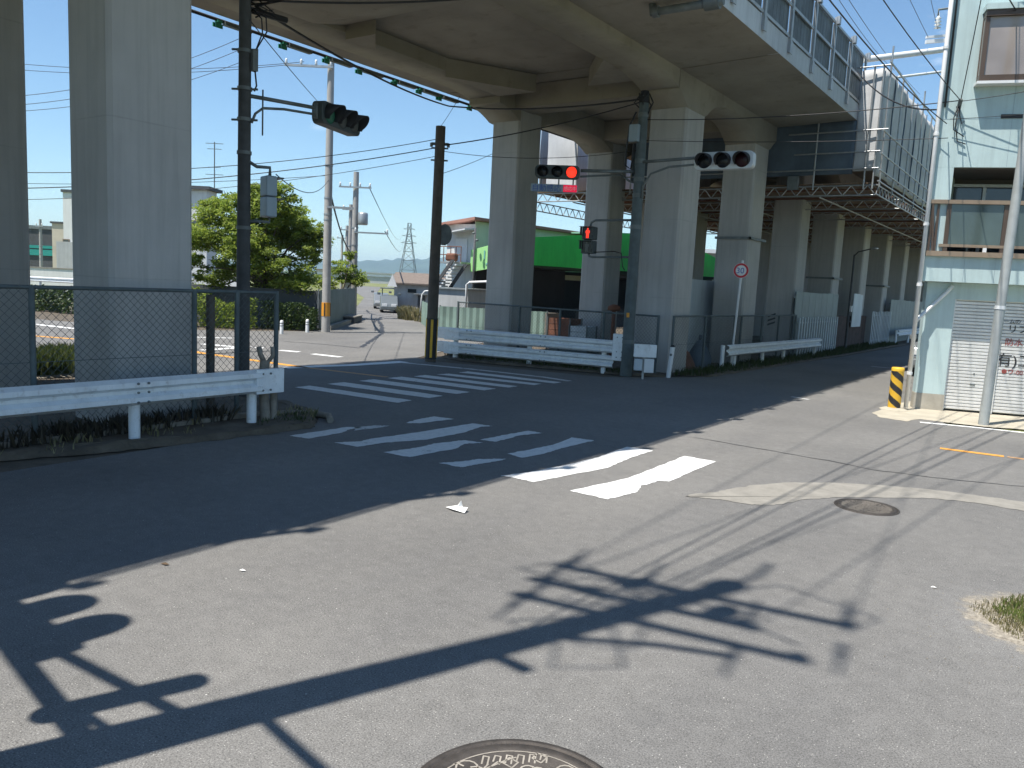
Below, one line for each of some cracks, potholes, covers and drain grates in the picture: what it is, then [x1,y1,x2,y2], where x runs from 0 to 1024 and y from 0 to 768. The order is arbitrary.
manhole cover [834,498,900,516]
manhole cover [421,739,603,768]
